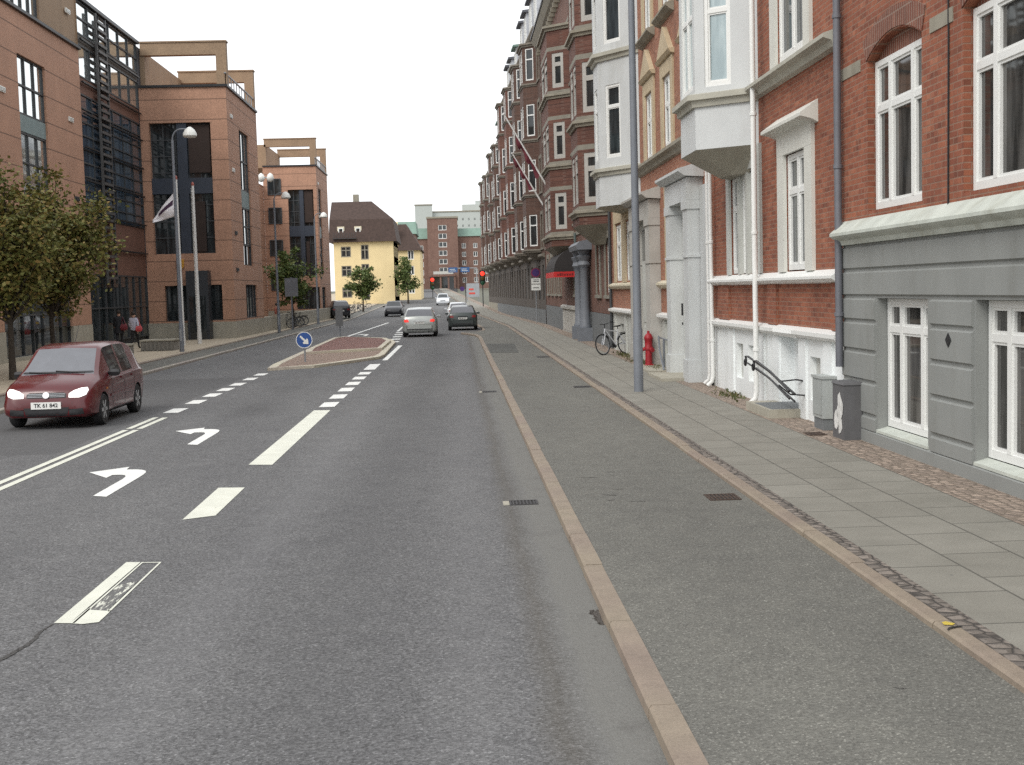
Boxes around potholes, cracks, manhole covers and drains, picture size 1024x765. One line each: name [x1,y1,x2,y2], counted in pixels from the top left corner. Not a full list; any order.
pothole [582,607,607,629]
crack [0,624,53,661]
drain grate [703,493,742,501]
